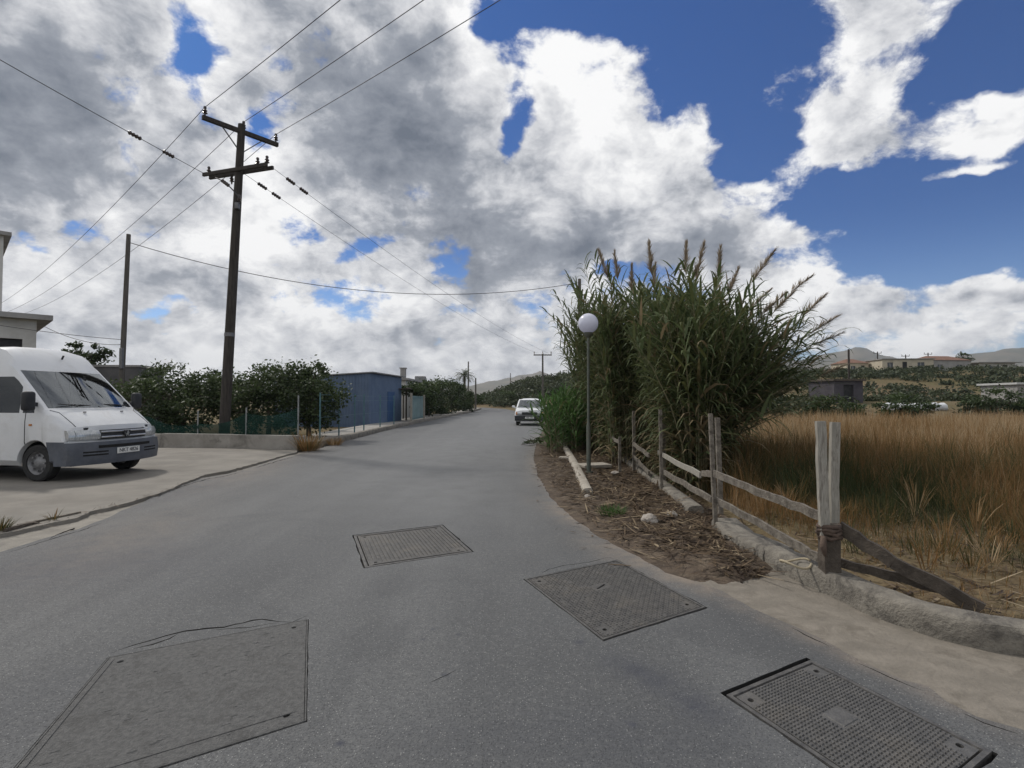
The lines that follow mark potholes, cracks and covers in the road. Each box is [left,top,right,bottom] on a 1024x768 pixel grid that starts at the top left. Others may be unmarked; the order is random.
manhole cover [524,560,707,641]
manhole cover [721,658,998,768]
manhole cover [352,525,474,568]
